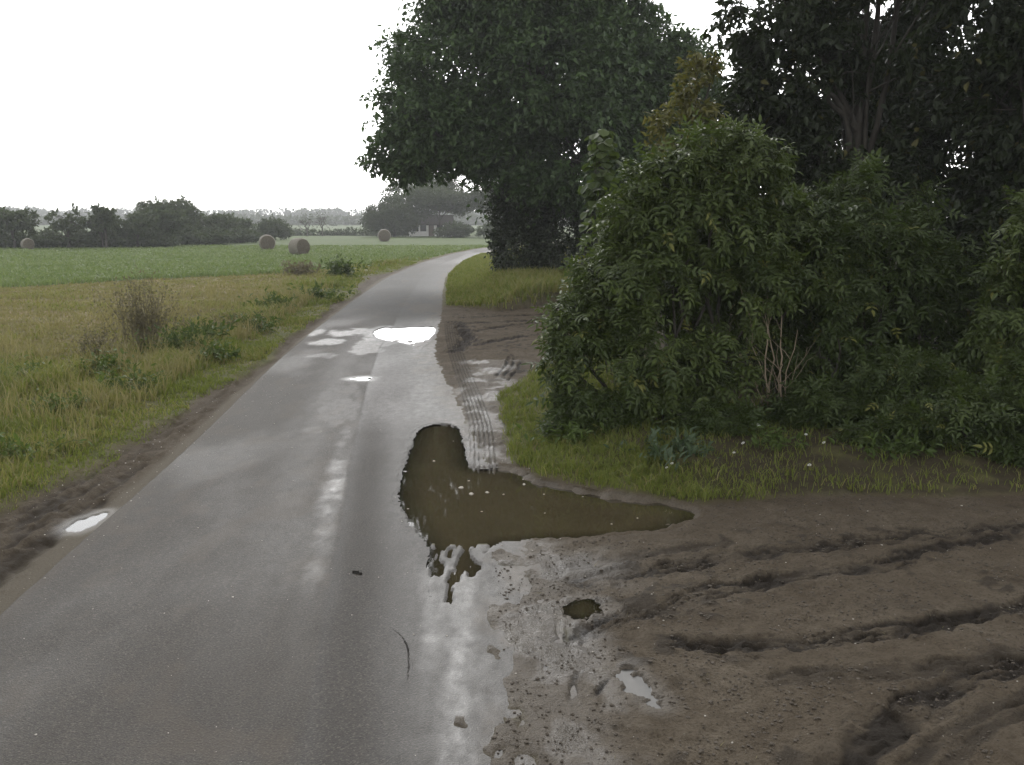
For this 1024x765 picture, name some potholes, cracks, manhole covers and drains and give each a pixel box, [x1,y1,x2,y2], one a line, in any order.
pothole [389,422,711,604]
crack [387,627,413,682]
pothole [369,325,439,350]
